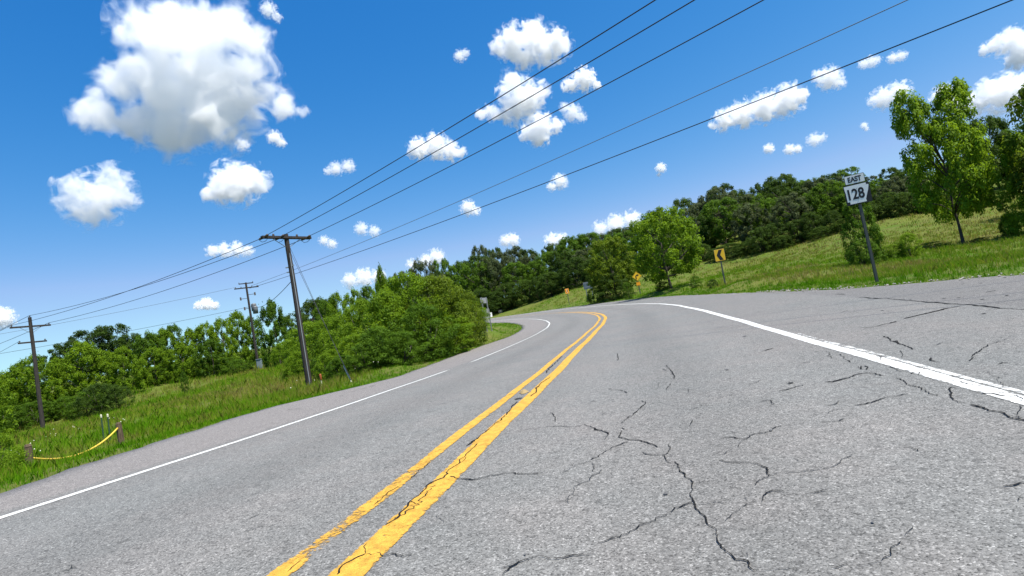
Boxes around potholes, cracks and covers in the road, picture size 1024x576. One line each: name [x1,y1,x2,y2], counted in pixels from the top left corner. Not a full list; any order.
crack [375,356,851,573]
crack [803,306,1024,421]
crack [337,527,411,574]
